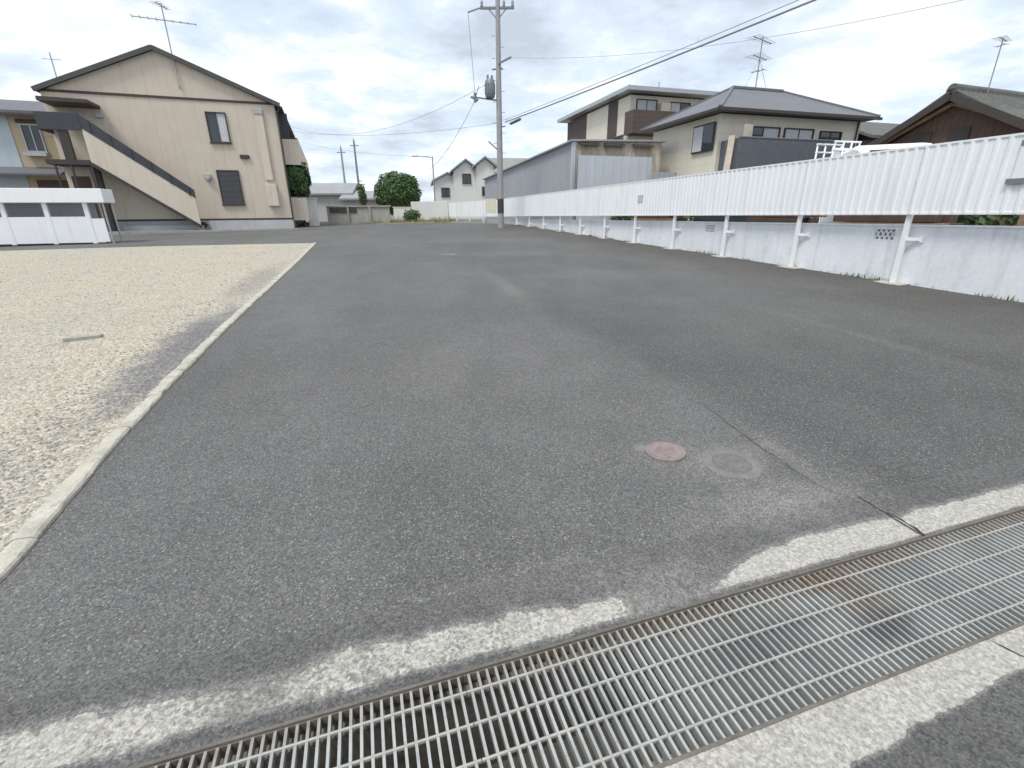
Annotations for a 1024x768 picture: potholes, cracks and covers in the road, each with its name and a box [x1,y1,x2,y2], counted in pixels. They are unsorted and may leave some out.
manhole cover [645,442,686,463]
drain grate [718,545,1022,705]
drain grate [906,511,1024,621]
drain grate [148,675,482,768]
manhole cover [702,449,763,479]
drain grate [463,600,808,768]
